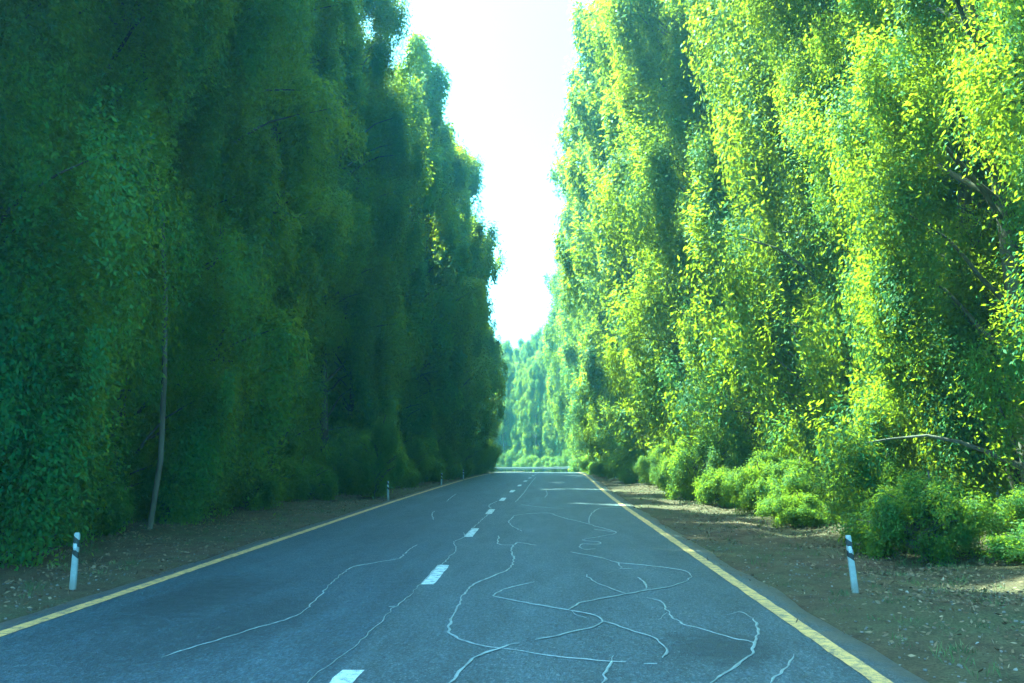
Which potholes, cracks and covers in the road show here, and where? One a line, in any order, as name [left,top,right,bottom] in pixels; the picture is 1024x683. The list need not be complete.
crack [163,545,416,657]
crack [307,477,794,683]
